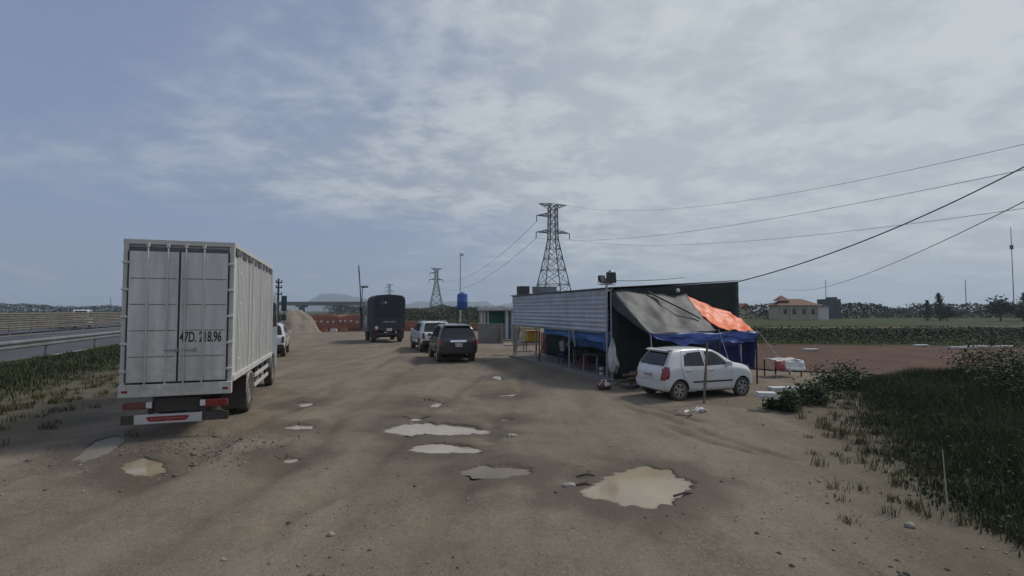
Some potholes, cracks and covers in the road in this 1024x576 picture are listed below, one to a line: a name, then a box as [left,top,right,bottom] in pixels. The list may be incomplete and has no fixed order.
pothole [55,432,142,468]
pothole [363,419,506,441]
pothole [92,451,190,483]
pothole [437,457,553,487]
pothole [389,439,500,459]
pothole [555,460,718,518]
